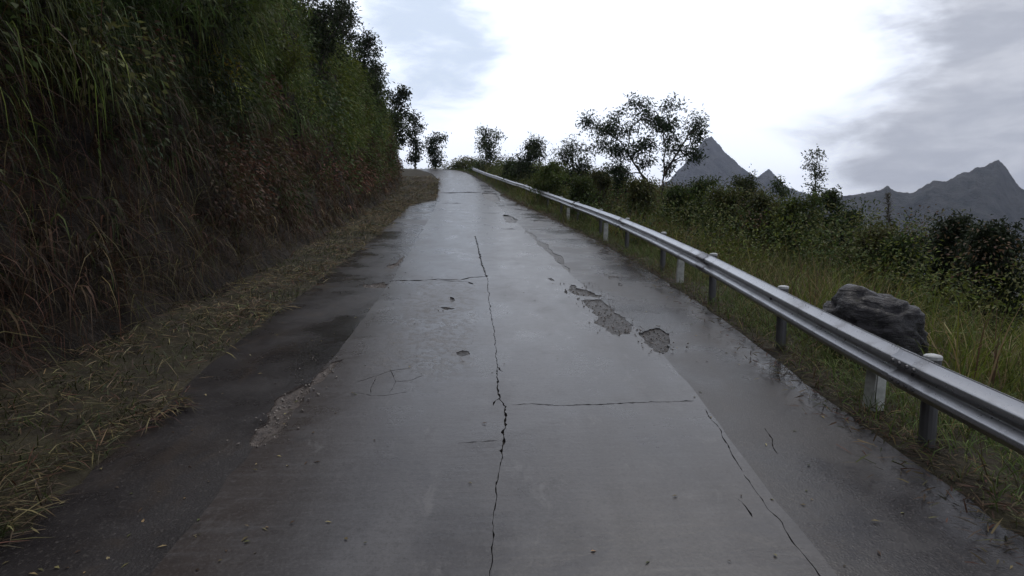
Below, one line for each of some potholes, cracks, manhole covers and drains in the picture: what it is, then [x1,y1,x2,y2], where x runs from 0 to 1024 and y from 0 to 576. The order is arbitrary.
pothole [639,328,670,354]
crack [705,409,820,576]
crack [390,236,507,576]
pothole [568,285,601,298]
crack [361,369,421,396]
pothole [582,299,633,336]
pothole [249,359,343,447]
